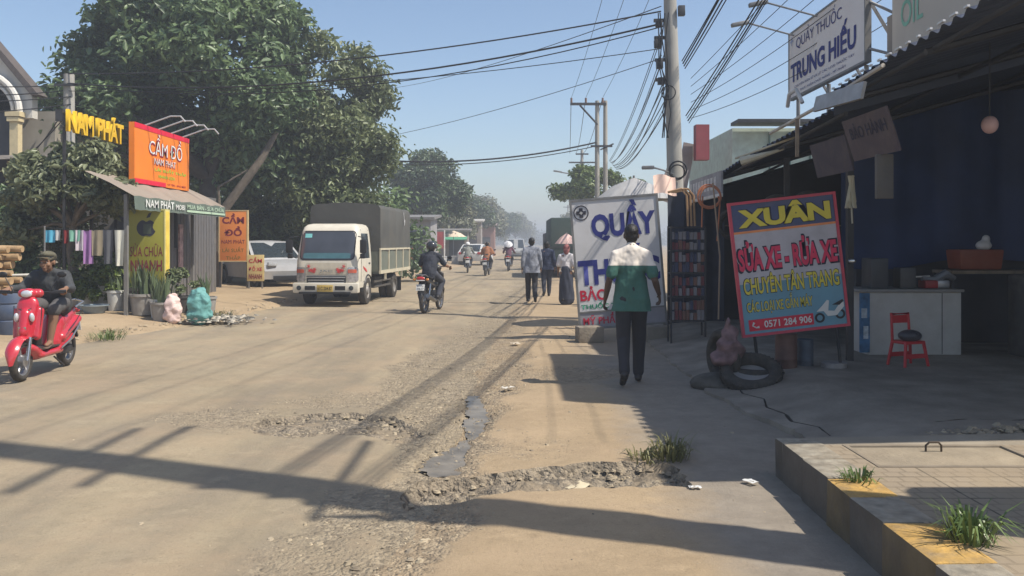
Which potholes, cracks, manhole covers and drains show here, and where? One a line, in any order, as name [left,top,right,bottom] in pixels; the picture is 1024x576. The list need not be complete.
manhole cover [842,441,1024,468]
crack [741,391,831,436]
pothole [245,412,425,444]
pothole [400,461,692,511]
